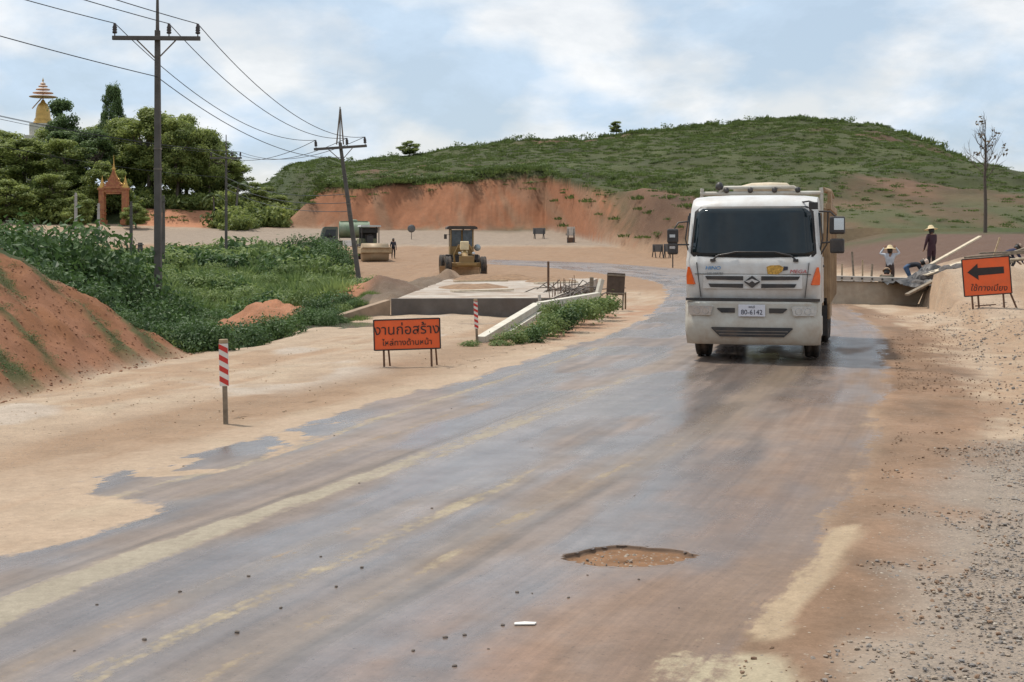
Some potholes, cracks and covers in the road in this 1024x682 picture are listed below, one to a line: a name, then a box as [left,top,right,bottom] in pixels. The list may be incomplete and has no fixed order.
pothole [554,544,708,569]
